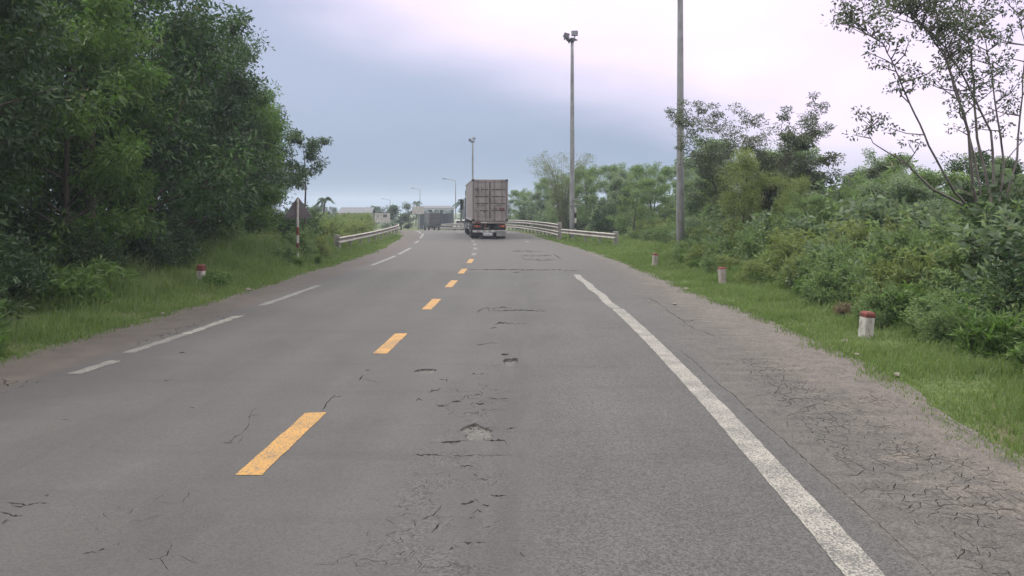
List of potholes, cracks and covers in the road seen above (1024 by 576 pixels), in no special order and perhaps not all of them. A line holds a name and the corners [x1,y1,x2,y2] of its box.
crack [417,373,505,414]
crack [720,343,1024,576]
pothole [460,423,494,441]
crack [2,494,190,571]
crack [321,427,525,569]
crack [478,307,534,345]
